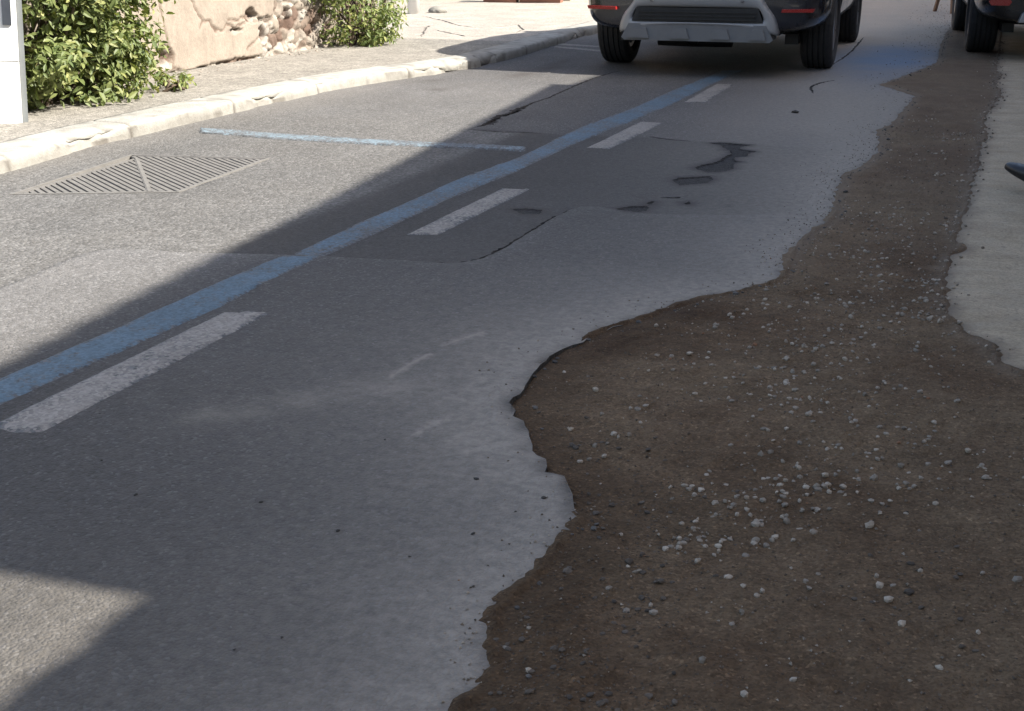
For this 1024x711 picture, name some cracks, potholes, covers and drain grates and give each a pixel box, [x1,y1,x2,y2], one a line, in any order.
crack [809,37,864,93]
pothole [673,176,713,186]
drain grate [10,154,270,195]
pothole [695,143,756,173]
crack [468,69,625,133]
